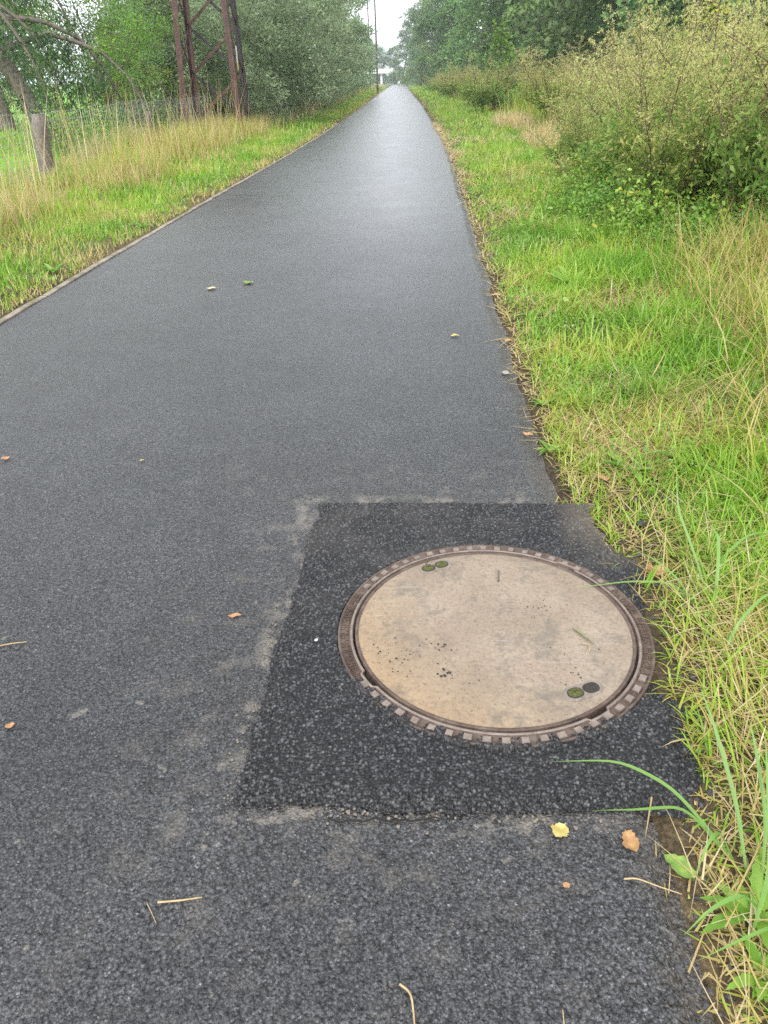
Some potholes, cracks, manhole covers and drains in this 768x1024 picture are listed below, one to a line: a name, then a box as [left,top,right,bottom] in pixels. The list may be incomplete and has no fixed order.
manhole cover [338,545,656,747]
